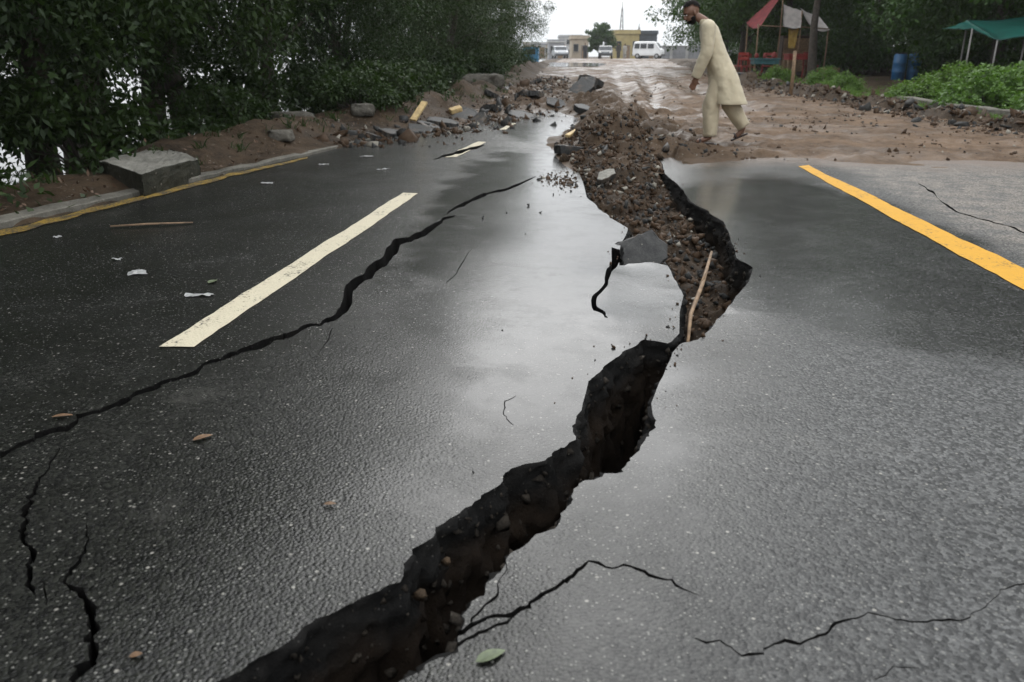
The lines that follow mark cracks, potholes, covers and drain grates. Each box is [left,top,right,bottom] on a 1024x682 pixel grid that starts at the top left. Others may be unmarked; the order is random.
crack [0,142,1024,682]
